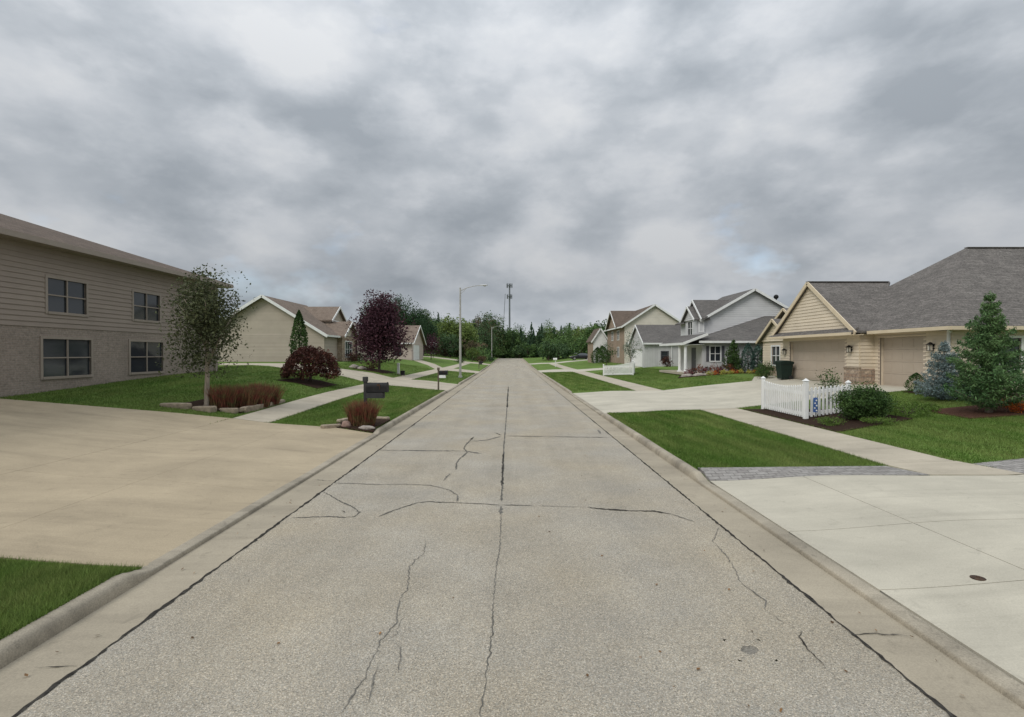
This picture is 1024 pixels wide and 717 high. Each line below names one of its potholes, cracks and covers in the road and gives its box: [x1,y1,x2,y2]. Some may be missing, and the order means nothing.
crack [590,507,695,522]
crack [291,433,569,518]
crack [712,529,787,624]
crack [342,541,426,712]
